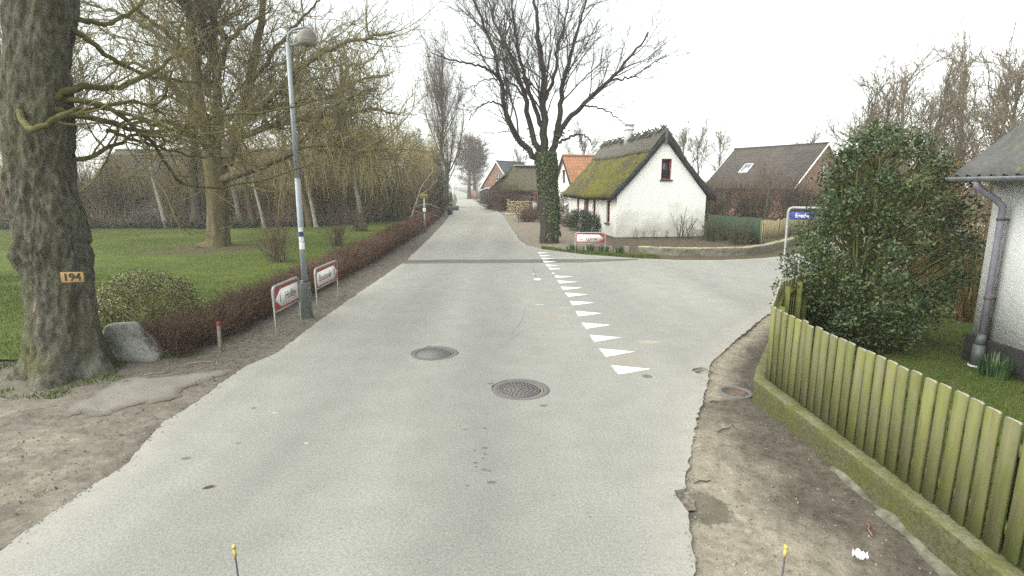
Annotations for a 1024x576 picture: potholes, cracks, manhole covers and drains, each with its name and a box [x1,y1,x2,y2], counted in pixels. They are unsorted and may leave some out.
manhole cover [411,347,458,361]
manhole cover [492,379,549,400]
